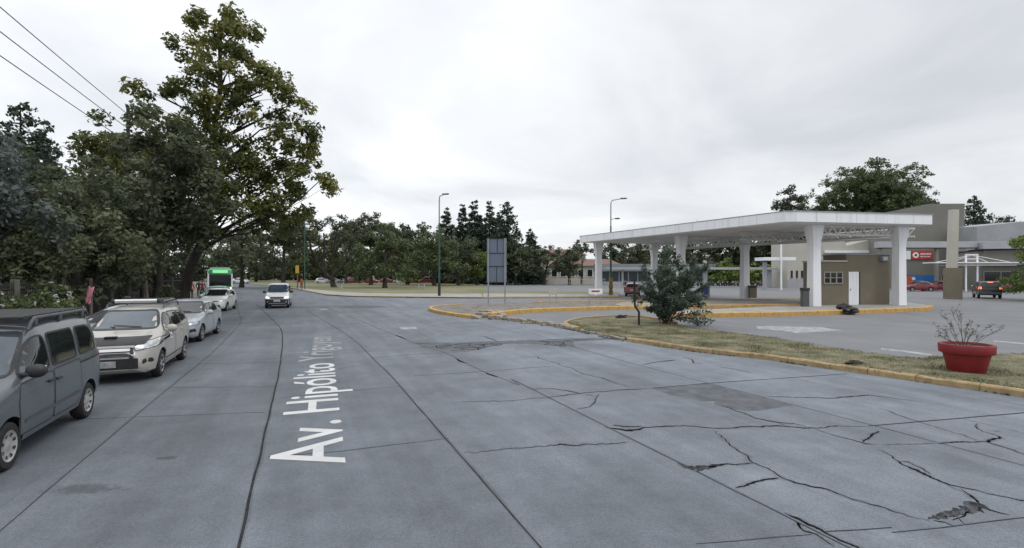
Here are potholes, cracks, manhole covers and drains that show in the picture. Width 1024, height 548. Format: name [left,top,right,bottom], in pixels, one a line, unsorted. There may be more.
pothole [677,463,717,472]
crack [465,404,1024,548]
crack [436,336,502,363]
pothole [927,488,1010,526]
crack [451,339,650,410]
